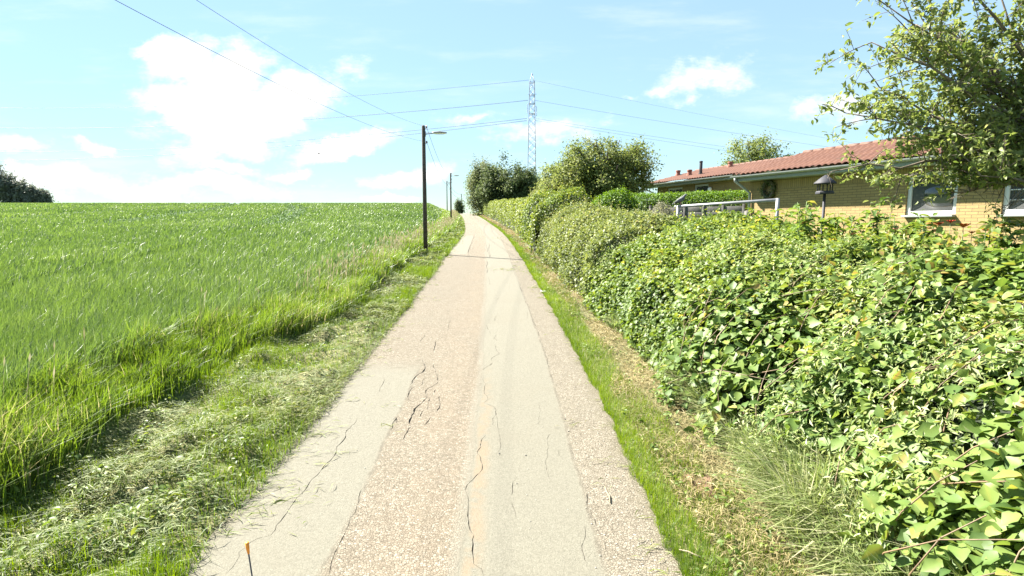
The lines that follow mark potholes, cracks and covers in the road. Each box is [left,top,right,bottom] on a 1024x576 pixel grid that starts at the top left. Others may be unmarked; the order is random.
crack [229,420,357,571]
crack [465,318,501,573]
crack [581,485,607,560]
crack [392,325,449,438]
